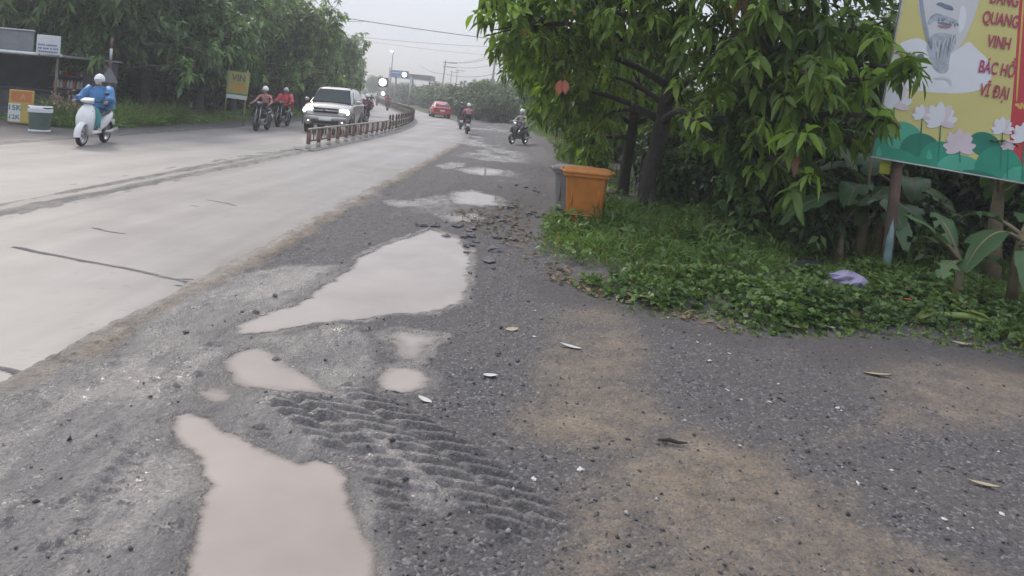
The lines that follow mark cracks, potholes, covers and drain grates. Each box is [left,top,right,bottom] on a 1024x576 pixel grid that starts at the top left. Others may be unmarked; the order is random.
pothole [362,362,445,397]
pothole [381,200,427,208]
pothole [218,227,479,338]
pothole [152,403,398,576]
pothole [440,190,510,208]
pothole [371,325,455,366]
pothole [453,166,516,176]
pothole [207,342,350,397]
